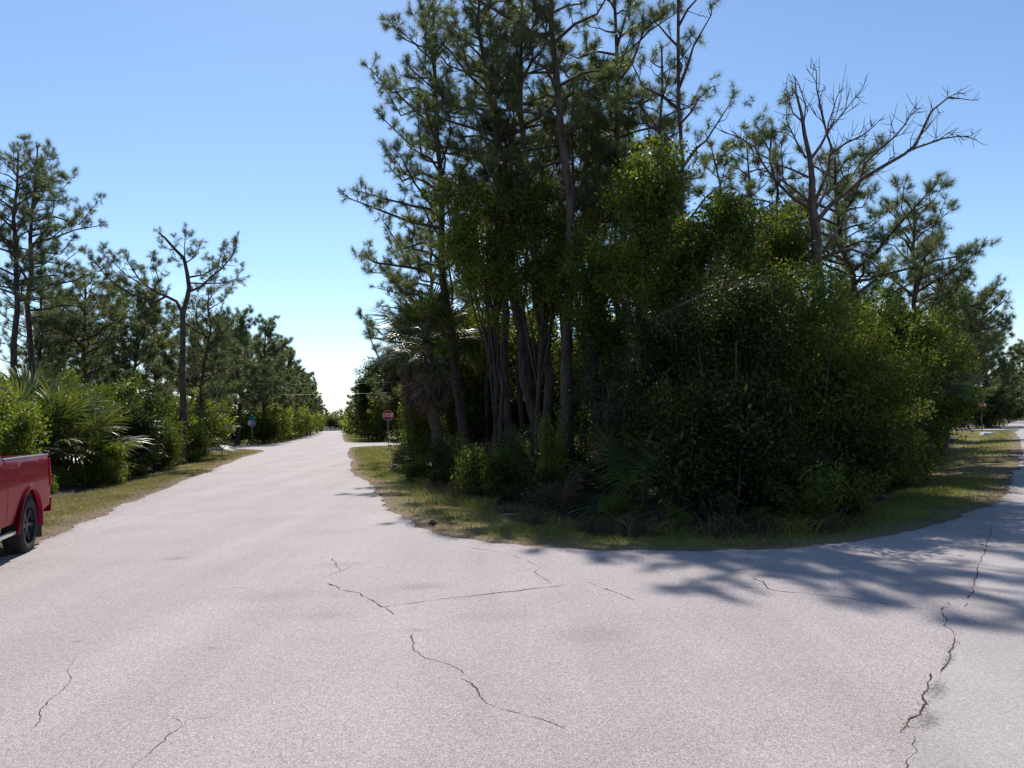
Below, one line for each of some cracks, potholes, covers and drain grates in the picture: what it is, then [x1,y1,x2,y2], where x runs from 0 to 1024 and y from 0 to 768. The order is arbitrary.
crack [133,717,208,767]
crack [327,547,563,615]
crack [900,601,960,768]
crack [749,578,929,610]
crack [410,634,565,729]
crack [15,659,75,738]
